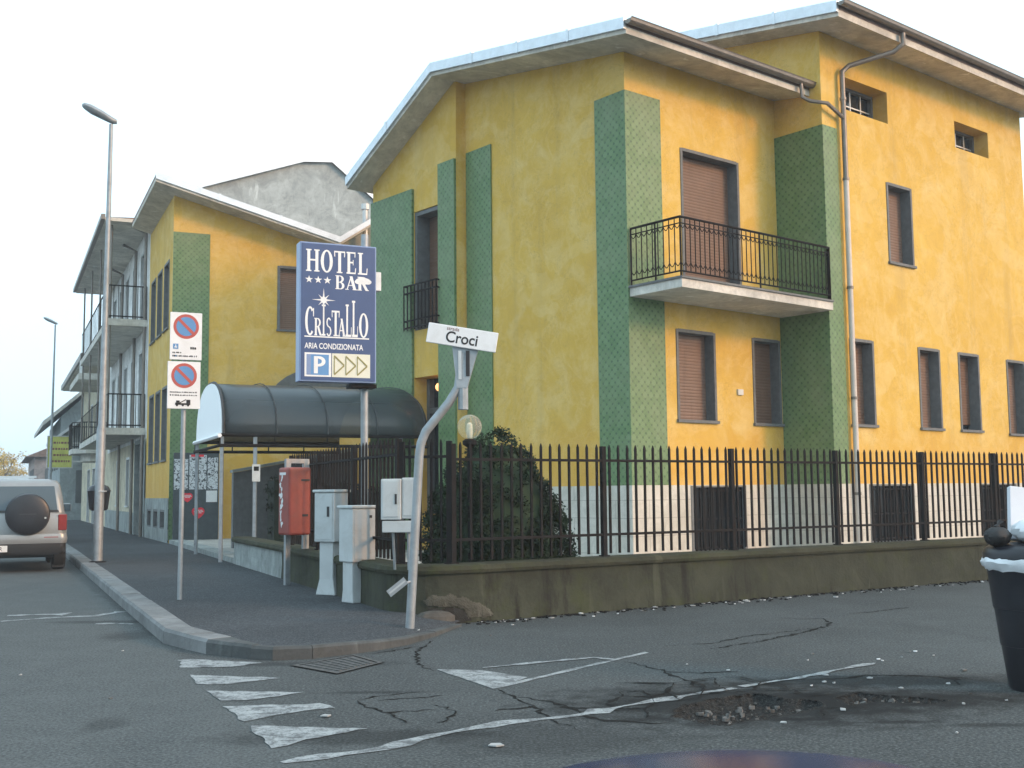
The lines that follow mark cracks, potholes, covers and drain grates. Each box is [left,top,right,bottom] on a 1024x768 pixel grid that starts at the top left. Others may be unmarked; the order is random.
pothole [670,692,826,726]
pothole [833,691,950,706]
crack [495,662,963,729]
crack [670,617,833,648]
